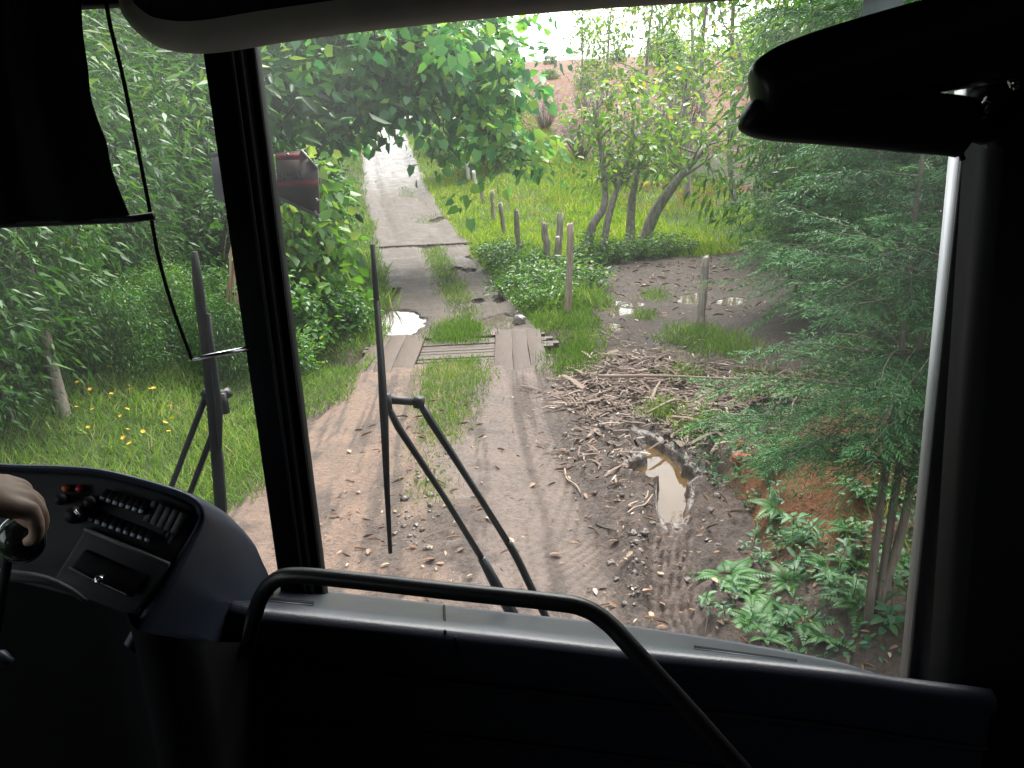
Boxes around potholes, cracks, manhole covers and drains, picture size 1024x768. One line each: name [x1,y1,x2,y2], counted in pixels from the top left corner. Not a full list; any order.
pothole [367,307,432,337]
pothole [622,425,702,536]
